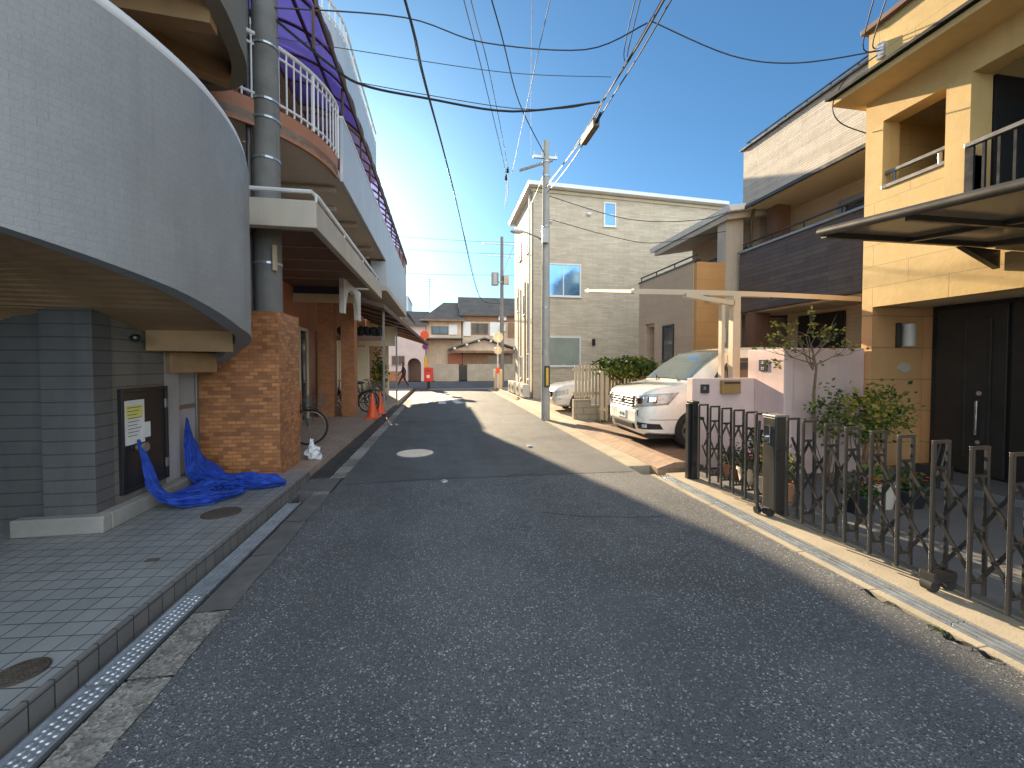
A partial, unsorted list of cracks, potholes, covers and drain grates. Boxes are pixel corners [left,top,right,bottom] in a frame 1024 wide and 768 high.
drain grate [310,405,401,480]
manhole cover [0,657,52,689]
manhole cover [200,507,242,520]
manhole cover [396,449,434,458]
